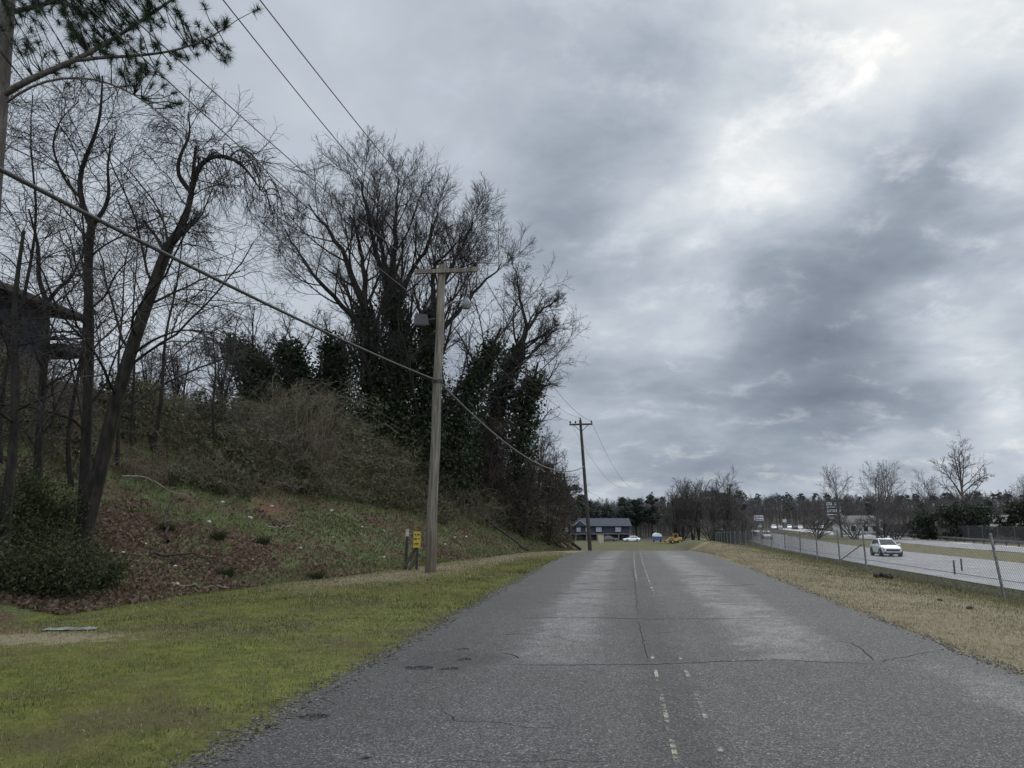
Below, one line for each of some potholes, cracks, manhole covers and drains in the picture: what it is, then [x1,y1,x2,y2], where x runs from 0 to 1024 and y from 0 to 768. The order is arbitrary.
crack [504,559,948,666]
crack [442,711,559,728]
